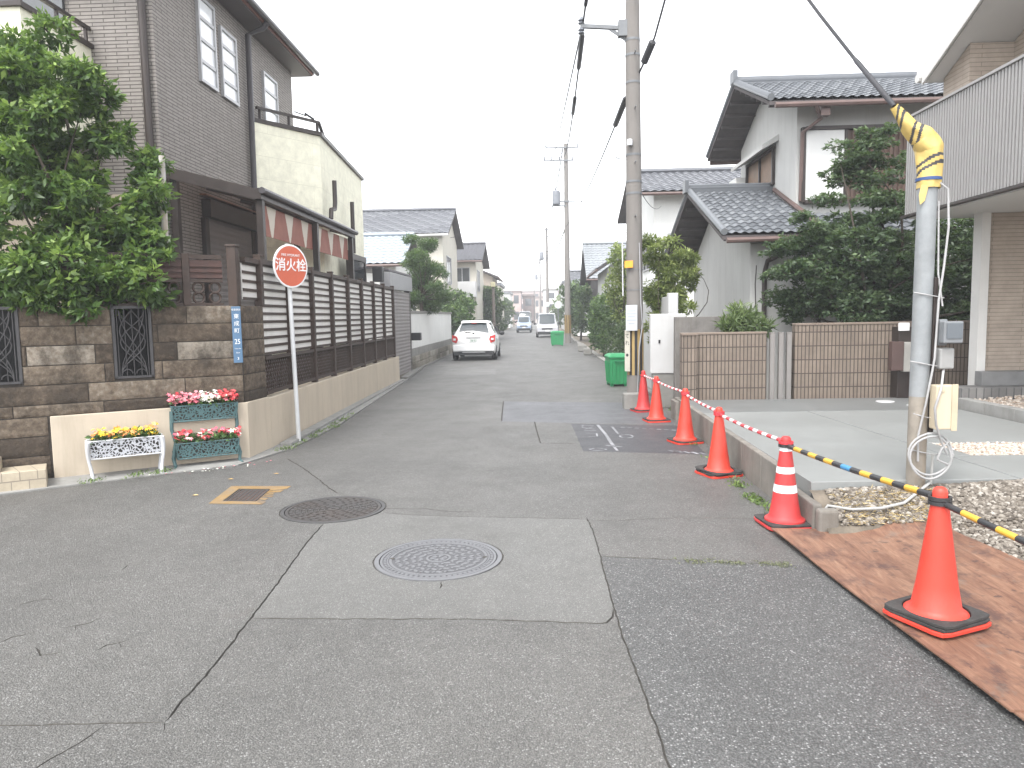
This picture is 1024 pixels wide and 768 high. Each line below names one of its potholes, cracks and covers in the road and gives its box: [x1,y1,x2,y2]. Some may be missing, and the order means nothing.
manhole cover [279,496,387,524]
manhole cover [372,538,504,581]
crack [2,632,65,656]
